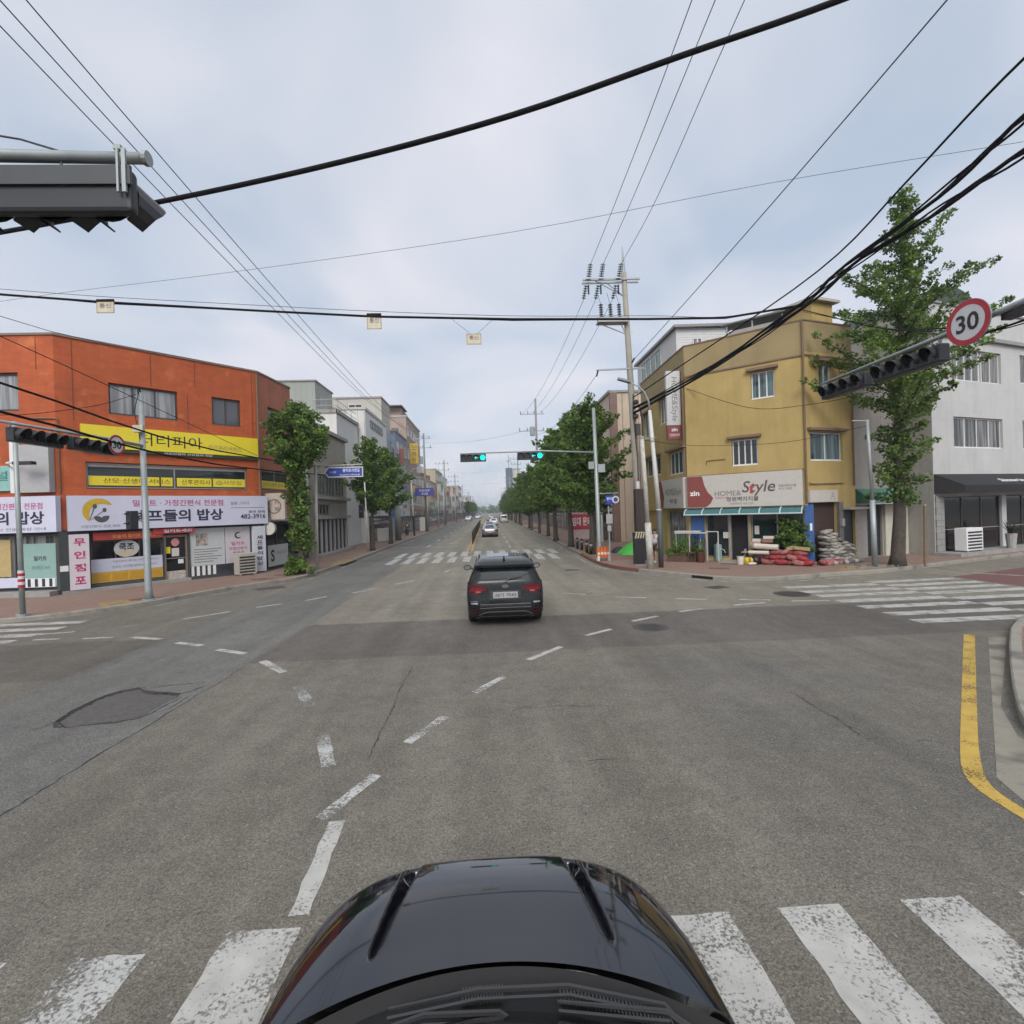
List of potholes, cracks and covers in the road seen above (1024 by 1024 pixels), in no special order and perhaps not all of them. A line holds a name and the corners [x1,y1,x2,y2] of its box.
manhole cover [632,623,669,631]
crack [366,667,412,761]
crack [792,692,877,738]
